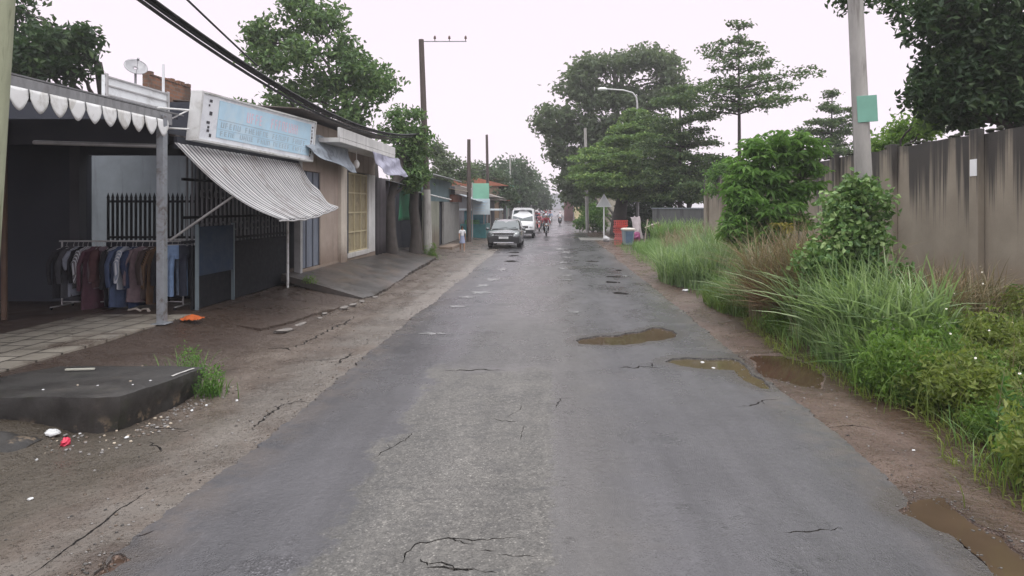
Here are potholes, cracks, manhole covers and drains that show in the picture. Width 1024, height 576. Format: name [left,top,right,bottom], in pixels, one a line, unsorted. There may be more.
crack [396,537,534,573]
pothole [896,491,1024,576]
pothole [662,354,774,390]
crack [269,316,356,350]
crack [28,488,156,576]
crack [252,399,320,430]
pothole [573,327,679,346]
